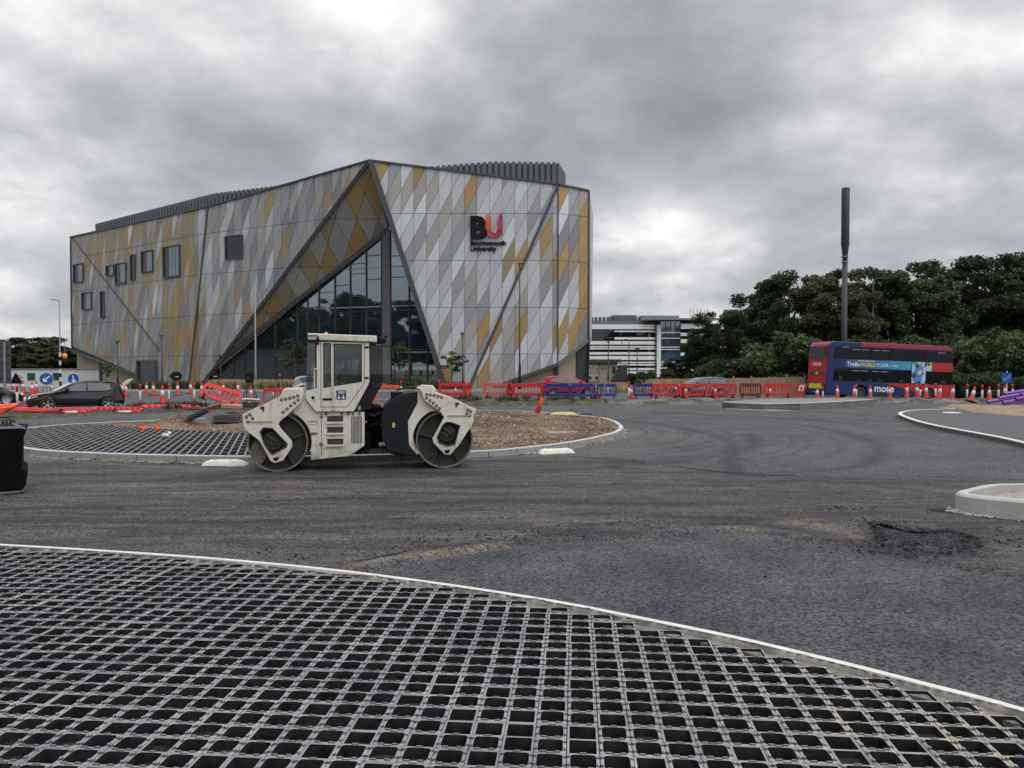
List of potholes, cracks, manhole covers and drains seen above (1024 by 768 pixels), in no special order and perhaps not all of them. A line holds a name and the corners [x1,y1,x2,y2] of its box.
pothole [858,521,993,559]
